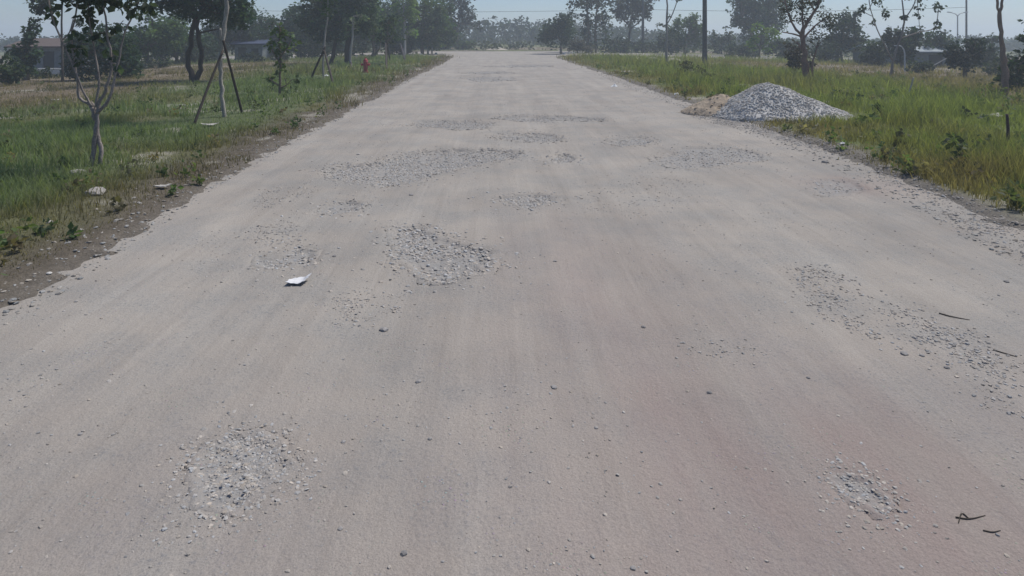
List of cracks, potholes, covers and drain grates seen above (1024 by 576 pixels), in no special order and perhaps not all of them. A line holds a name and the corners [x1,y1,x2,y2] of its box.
pothole [477,129,567,145]
pothole [383,118,500,132]
pothole [95,391,371,569]
pothole [276,191,389,222]
pothole [328,216,535,301]
pothole [299,144,536,191]
pothole [640,142,793,172]
pothole [459,188,591,215]
pothole [477,113,617,123]
pothole [592,135,661,147]
